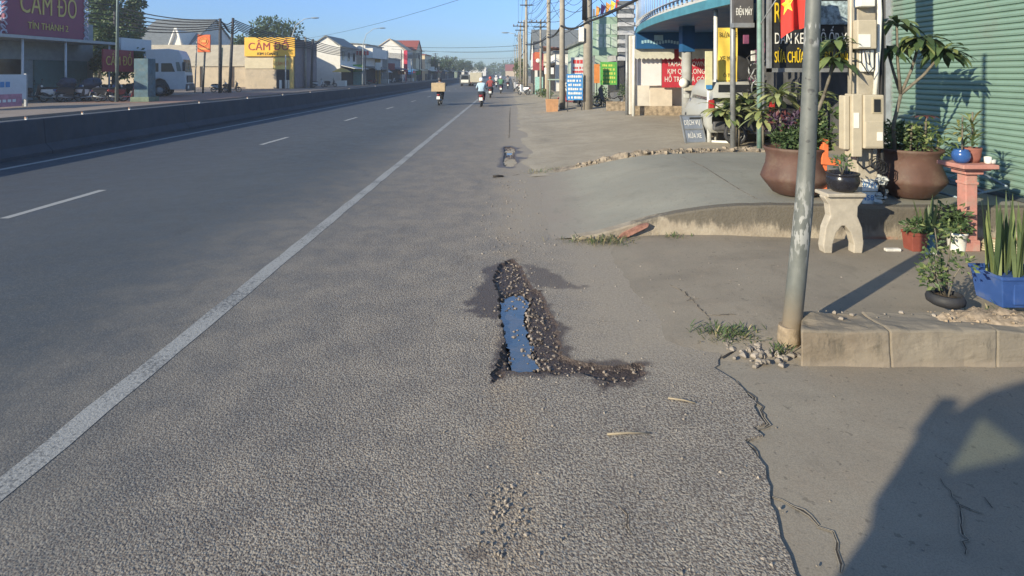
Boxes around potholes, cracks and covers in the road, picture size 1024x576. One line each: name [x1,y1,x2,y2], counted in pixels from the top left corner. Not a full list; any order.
crack [770,495,844,573]
crack [736,381,771,457]
crack [671,285,736,320]
crack [940,479,993,555]
pothole [503,147,516,166]
pothole [490,259,647,389]
